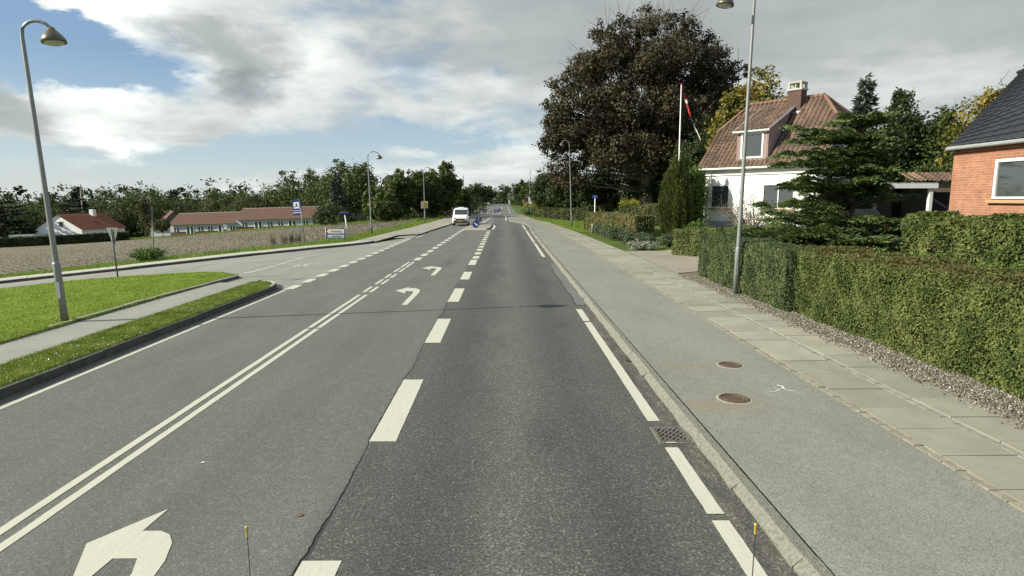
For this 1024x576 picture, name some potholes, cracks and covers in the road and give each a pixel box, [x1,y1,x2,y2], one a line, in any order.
manhole cover [716,393,752,404]
manhole cover [716,361,744,369]
drain grate [650,427,695,444]
